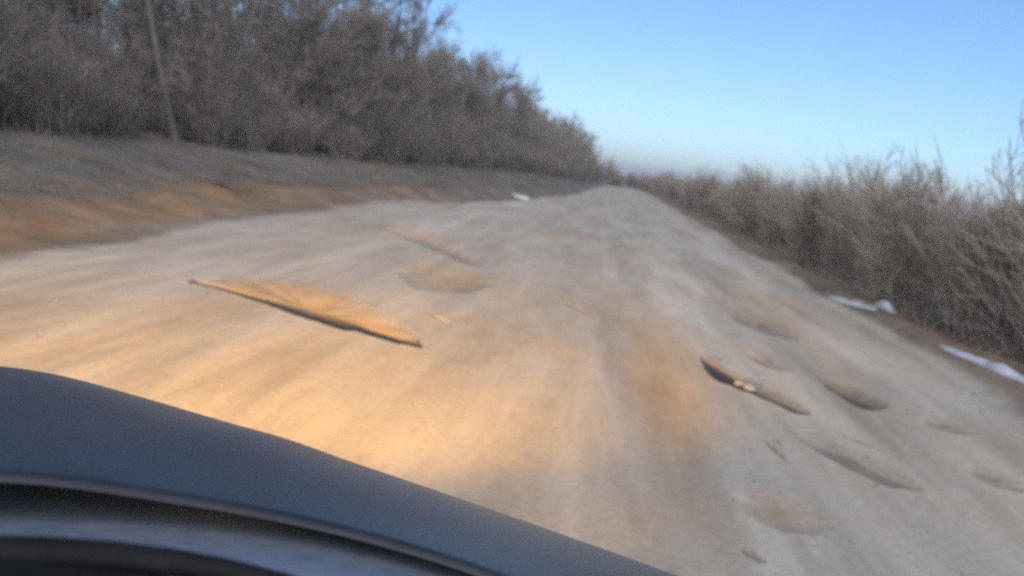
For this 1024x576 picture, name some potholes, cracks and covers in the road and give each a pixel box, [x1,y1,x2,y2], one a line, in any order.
pothole [715,480,847,545]
pothole [376,222,489,268]
pothole [391,261,504,295]
pothole [693,354,820,419]
pothole [909,411,988,440]
pothole [951,459,1024,498]
pothole [814,378,899,414]
pothole [738,348,804,376]
pothole [782,425,941,498]
pothole [179,274,435,351]
pothole [720,309,809,343]
